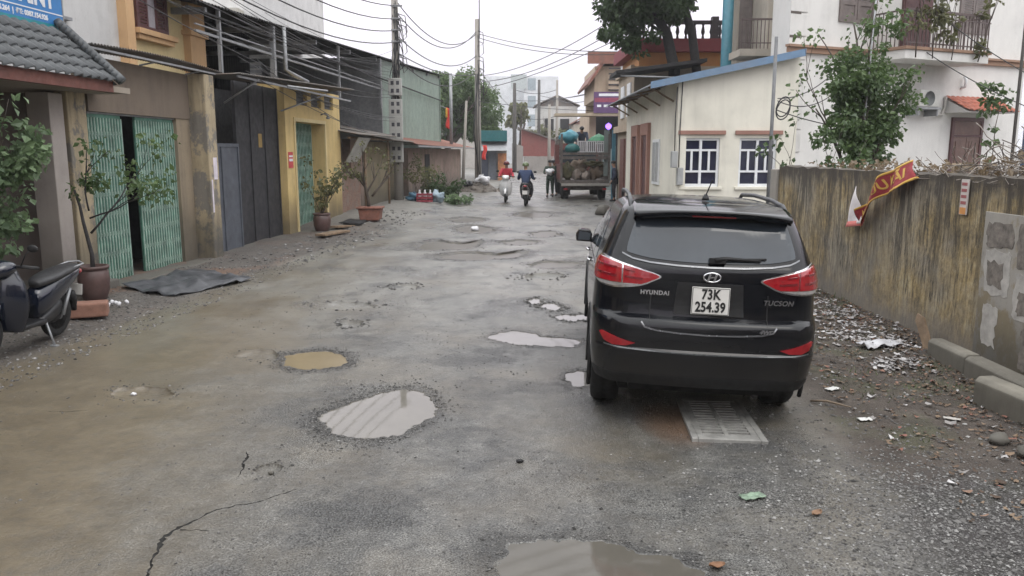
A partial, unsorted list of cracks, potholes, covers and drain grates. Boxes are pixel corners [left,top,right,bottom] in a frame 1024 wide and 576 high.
pothole [565,370,590,387]
crack [146,488,298,576]
pothole [284,350,348,370]
pothole [317,388,439,439]
pothole [235,350,279,360]
drain grate [676,398,768,444]
pothole [432,249,530,261]
pothole [110,386,175,401]
pothole [412,240,487,250]
pothole [493,538,709,576]
pothole [487,331,582,347]
